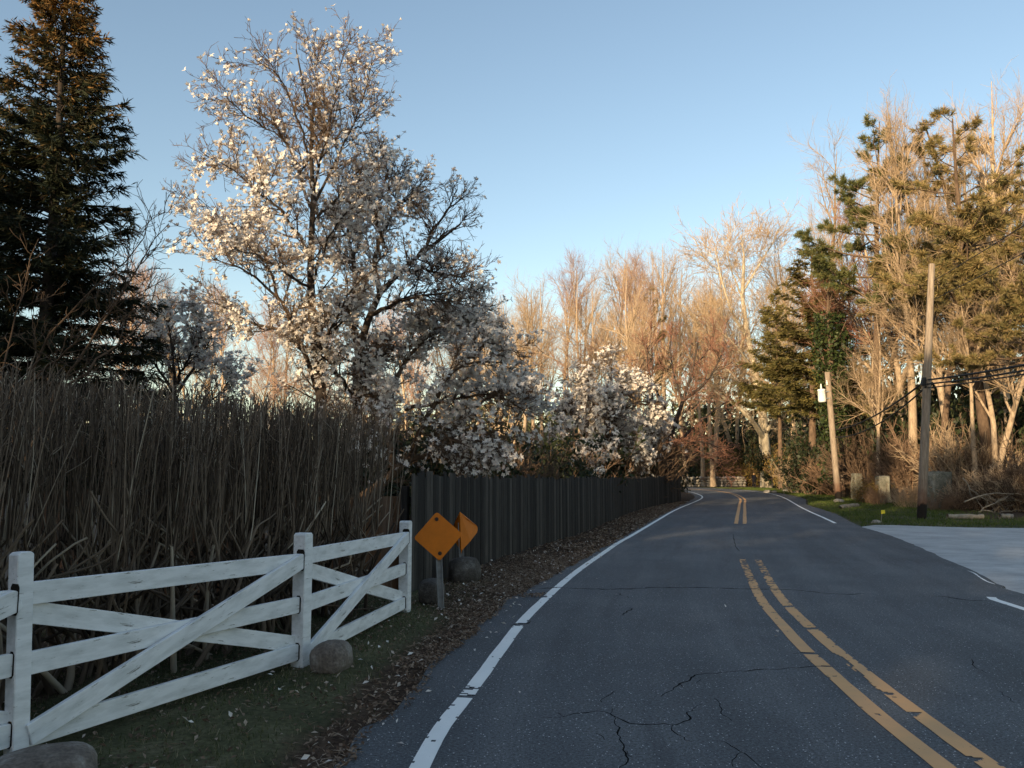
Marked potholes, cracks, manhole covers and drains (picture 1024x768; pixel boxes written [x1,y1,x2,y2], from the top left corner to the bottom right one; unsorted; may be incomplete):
crack [534,587,982,616]
crack [661,653,829,696]
crack [548,691,701,768]
